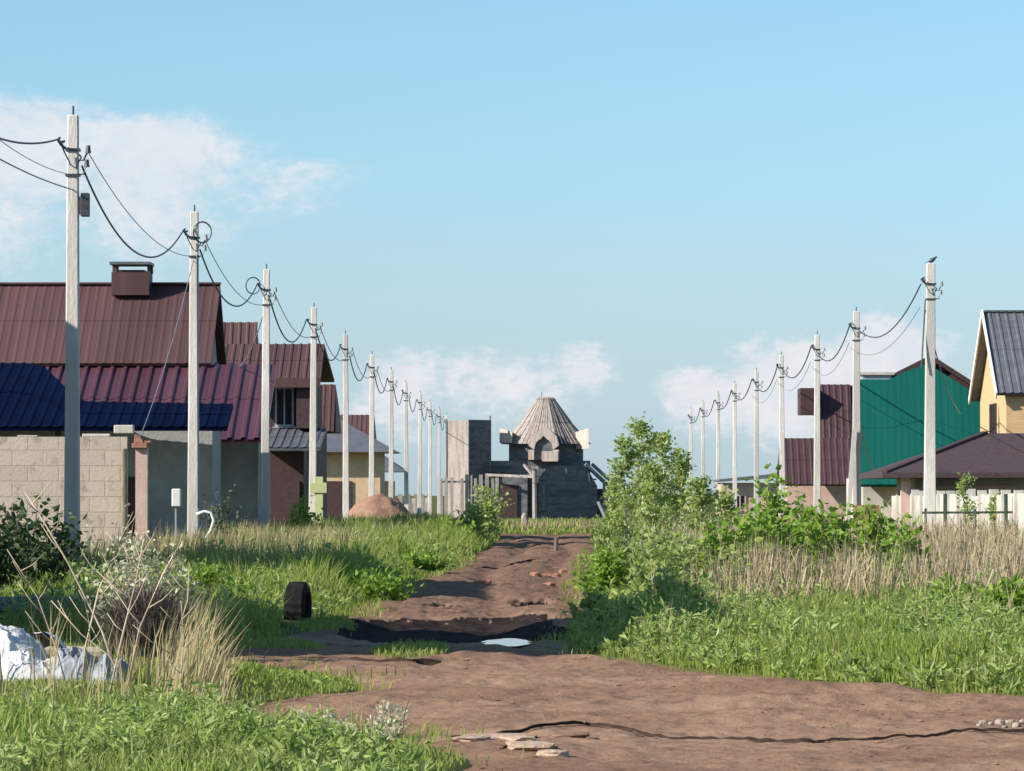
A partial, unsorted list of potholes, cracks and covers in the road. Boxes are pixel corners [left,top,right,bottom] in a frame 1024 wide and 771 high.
pothole [335,614,568,644]
crack [444,720,1024,749]
